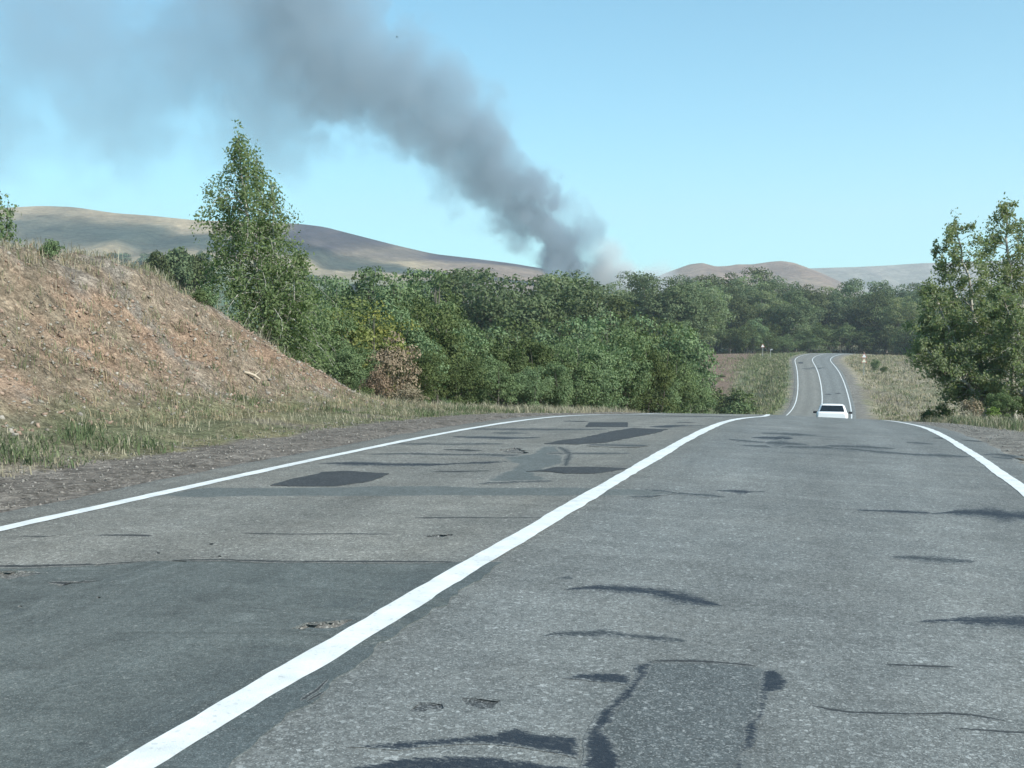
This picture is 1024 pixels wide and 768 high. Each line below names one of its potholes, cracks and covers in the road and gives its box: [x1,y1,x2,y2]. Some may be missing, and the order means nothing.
pothole [492,447,533,455]
crack [539,627,757,666]
pothole [281,617,363,632]
pothole [451,693,513,714]
crack [812,705,1024,734]
pothole [394,698,456,717]
